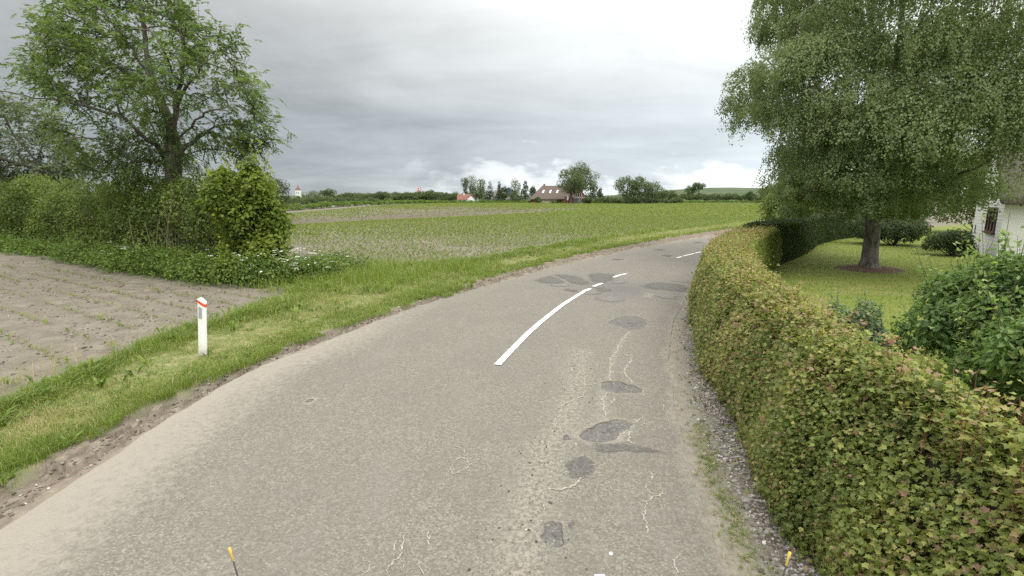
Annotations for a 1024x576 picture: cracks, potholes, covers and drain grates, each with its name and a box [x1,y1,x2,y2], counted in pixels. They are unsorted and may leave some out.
crack [362,529,430,576]
crack [553,277,674,533]
